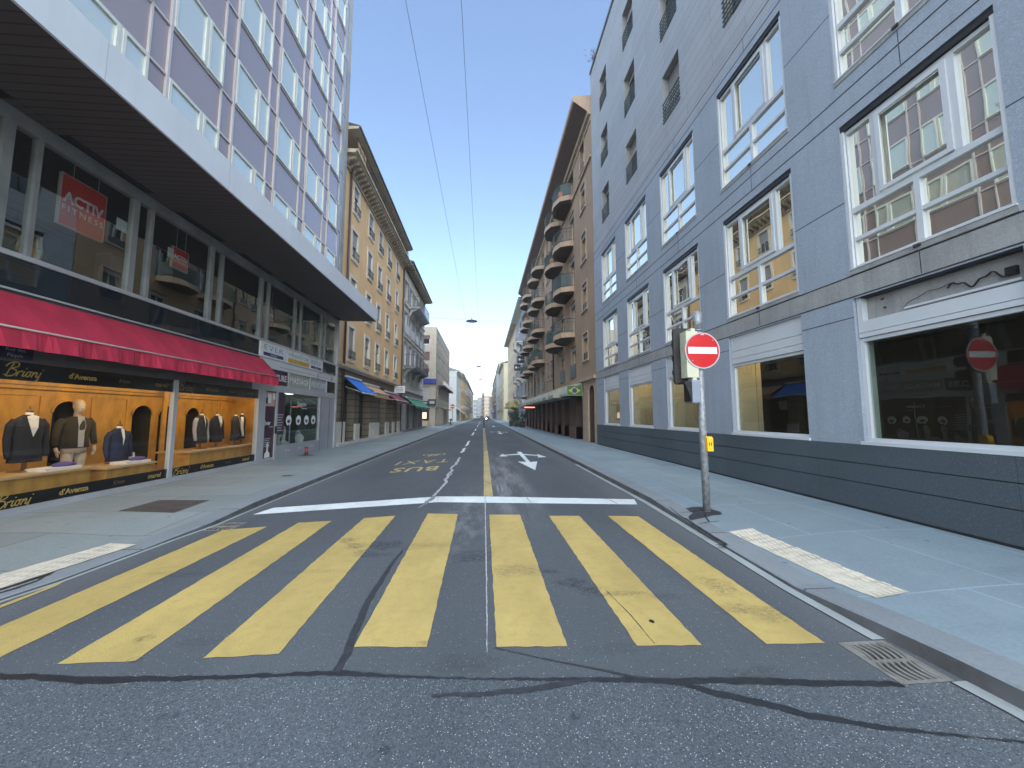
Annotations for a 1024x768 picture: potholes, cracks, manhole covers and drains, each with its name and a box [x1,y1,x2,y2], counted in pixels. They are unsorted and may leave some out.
drain grate [837,640,954,685]
drain grate [202,522,248,531]
manhole cover [120,500,209,513]
